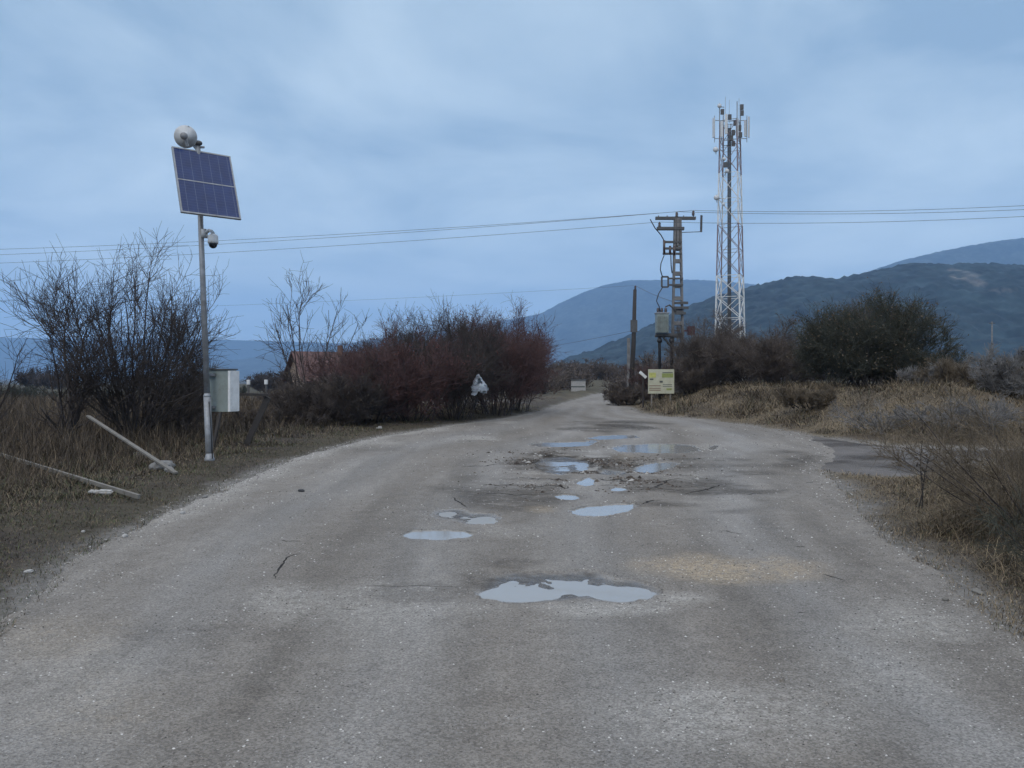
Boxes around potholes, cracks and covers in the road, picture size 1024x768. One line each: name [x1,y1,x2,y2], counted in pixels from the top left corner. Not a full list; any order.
pothole [567,502,640,516]
pothole [428,508,503,525]
pothole [629,461,684,473]
pothole [575,477,596,486]
pothole [611,443,701,453]
pothole [531,454,596,475]
pothole [400,529,478,540]
pothole [528,439,600,447]
pothole [465,568,663,604]
